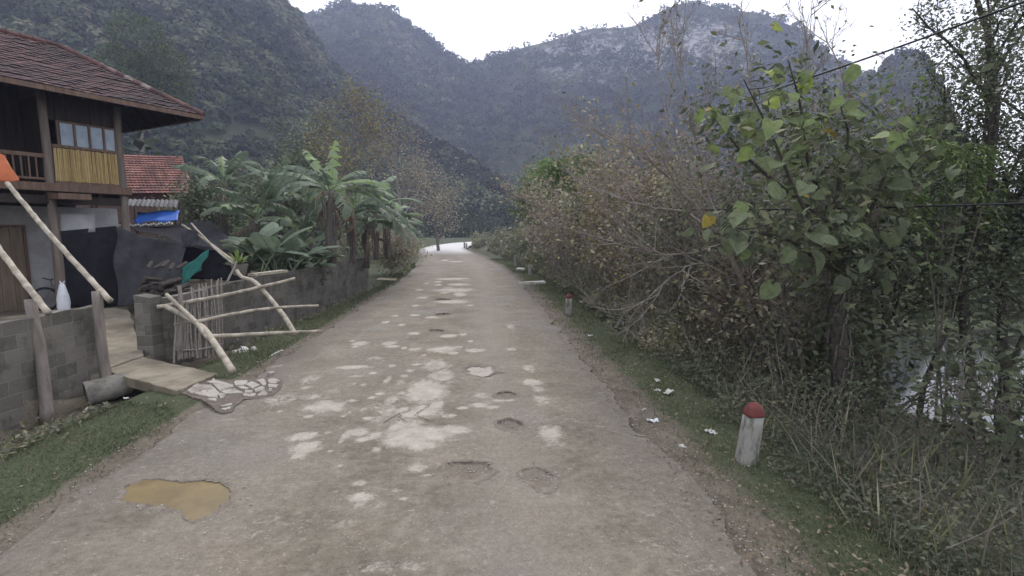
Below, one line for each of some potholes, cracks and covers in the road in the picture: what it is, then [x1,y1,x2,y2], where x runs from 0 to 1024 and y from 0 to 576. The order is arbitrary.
pothole [488,417,535,434]
pothole [516,464,565,497]
pothole [489,390,519,400]
pothole [89,473,252,534]
crack [383,404,430,423]
pothole [433,459,501,484]
